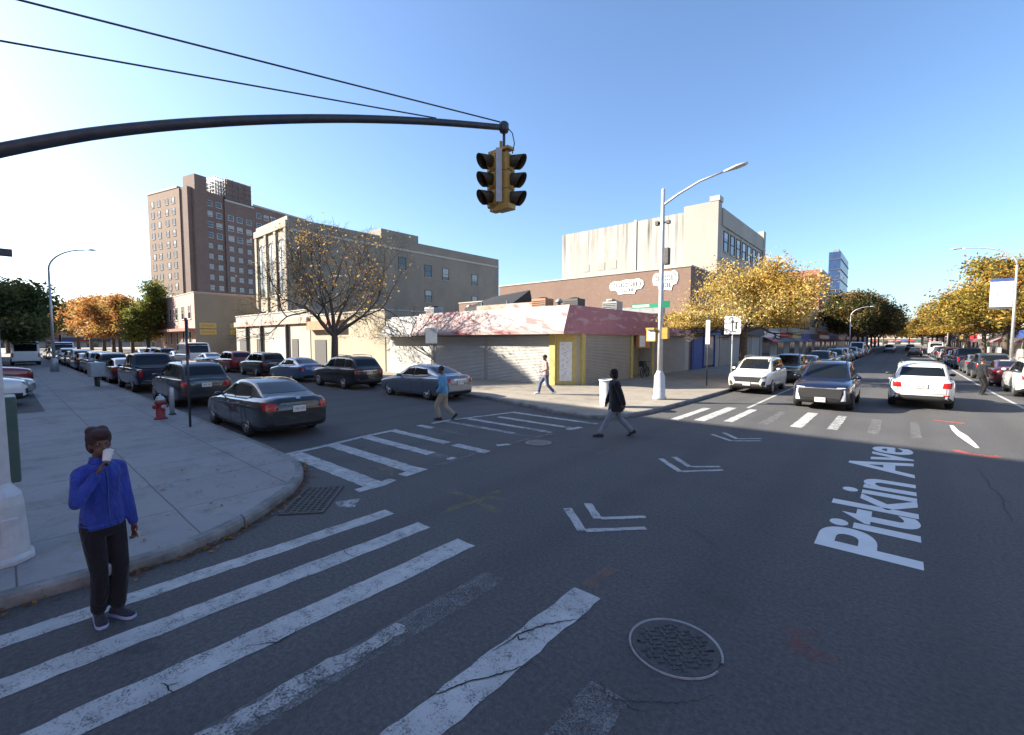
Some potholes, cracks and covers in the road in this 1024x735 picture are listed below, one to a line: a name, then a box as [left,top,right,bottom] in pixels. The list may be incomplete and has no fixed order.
manhole cover [629,618,724,680]
drain grate [278,486,344,515]
crack [600,682,713,711]
crack [429,618,582,697]
